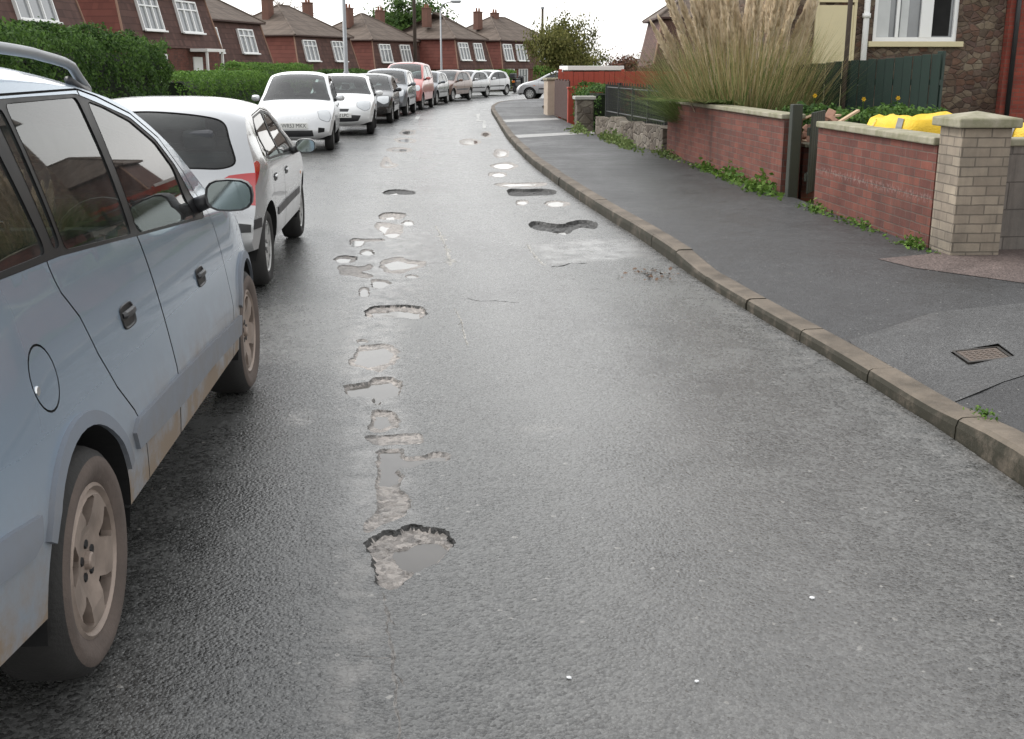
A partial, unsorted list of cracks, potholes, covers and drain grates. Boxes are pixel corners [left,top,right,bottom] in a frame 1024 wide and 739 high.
crack [526,244,587,267]
pothole [363,448,451,533]
pothole [364,305,428,319]
manhole cover [951,346,1012,365]
pothole [349,238,385,247]
pothole [364,433,425,446]
pothole [507,188,557,196]
pothole [333,255,358,263]
pothole [348,343,401,372]
pothole [378,212,406,220]
pothole [363,524,456,590]
crack [454,298,516,345]
